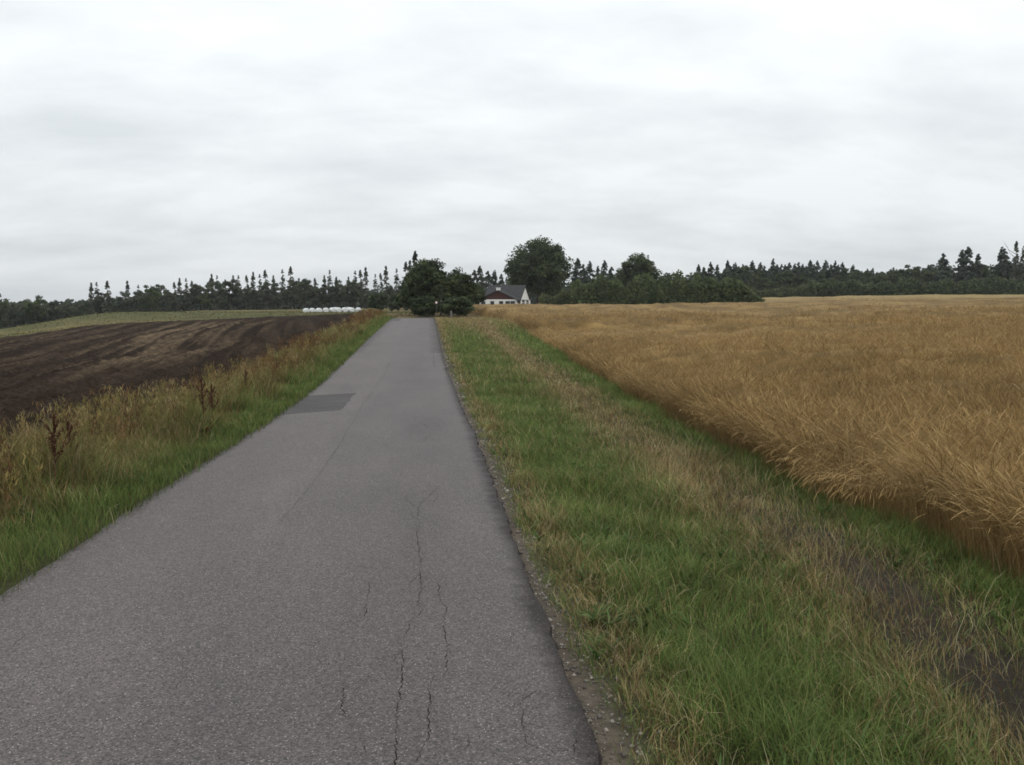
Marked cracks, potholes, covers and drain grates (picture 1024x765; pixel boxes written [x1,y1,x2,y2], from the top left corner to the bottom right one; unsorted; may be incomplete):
crack [383,489,474,765]
crack [520,689,538,748]
crack [340,684,367,754]
